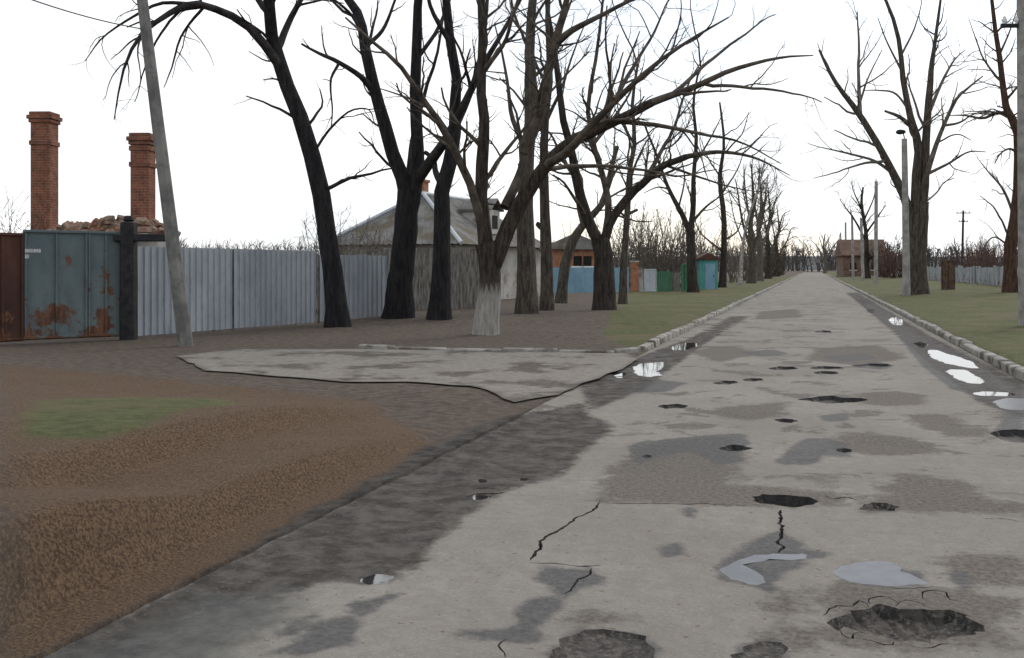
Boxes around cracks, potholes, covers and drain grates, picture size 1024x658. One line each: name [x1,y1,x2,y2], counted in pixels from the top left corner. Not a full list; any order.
pothole [549,629,655,658]
pothole [753,494,819,508]
pothole [826,604,985,643]
pothole [730,641,789,658]
crack [530,502,601,594]
crack [775,510,786,553]
pothole [797,396,867,404]
pothole [990,429,1024,443]
pothole [859,502,900,511]
